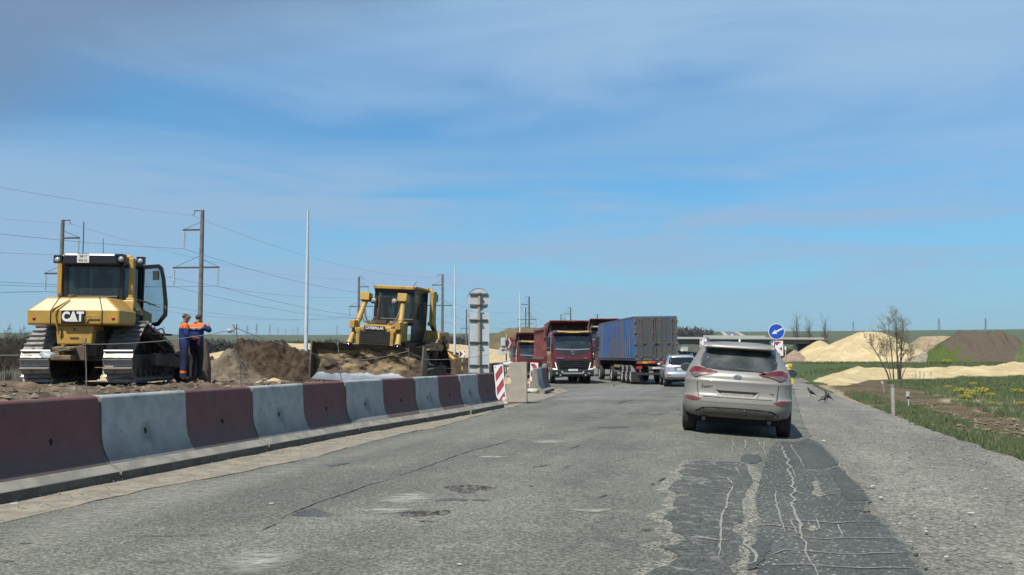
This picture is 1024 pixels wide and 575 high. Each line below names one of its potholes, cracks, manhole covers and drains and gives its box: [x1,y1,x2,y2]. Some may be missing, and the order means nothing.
pothole [445,485,496,494]
crack [727,440,914,575]
